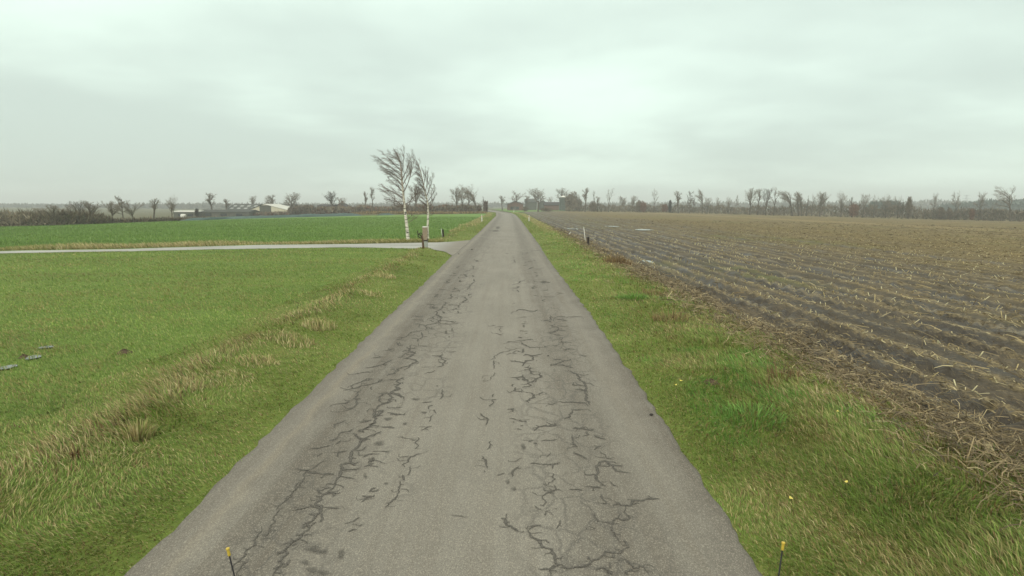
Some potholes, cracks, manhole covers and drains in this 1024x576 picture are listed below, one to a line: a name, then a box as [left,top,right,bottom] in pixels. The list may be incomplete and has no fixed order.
crack [223,260,478,576]
crack [475,252,660,576]
